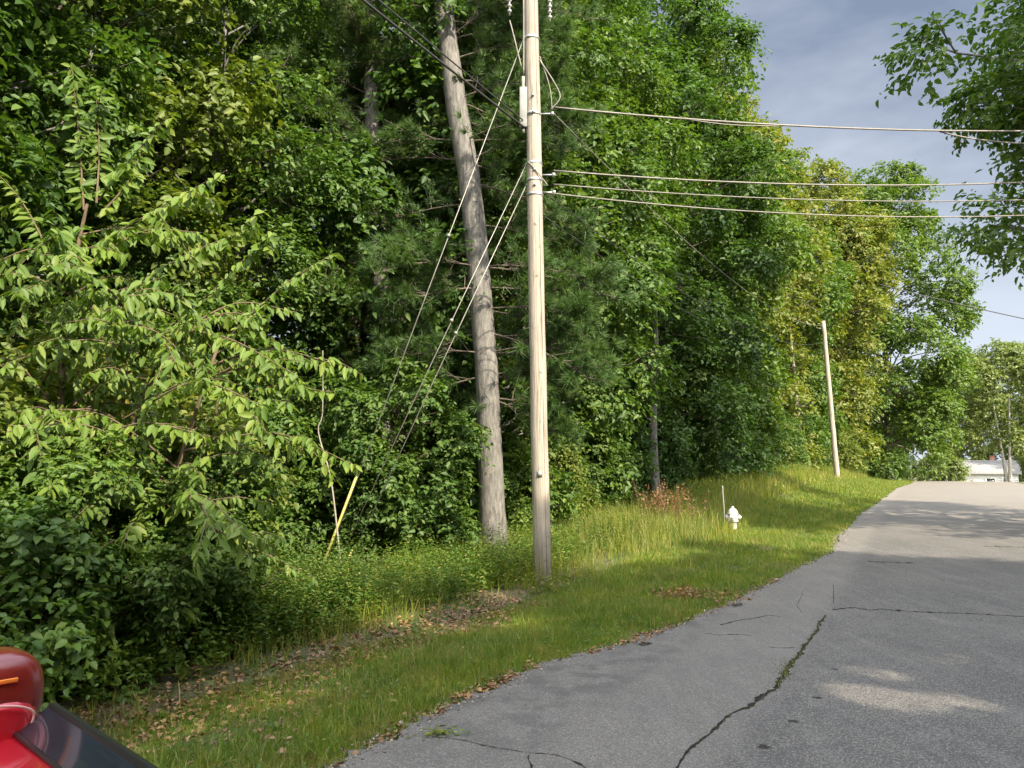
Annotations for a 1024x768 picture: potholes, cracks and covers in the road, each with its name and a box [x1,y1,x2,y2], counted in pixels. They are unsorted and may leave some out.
crack [675,592,1024,768]
crack [436,737,586,768]
